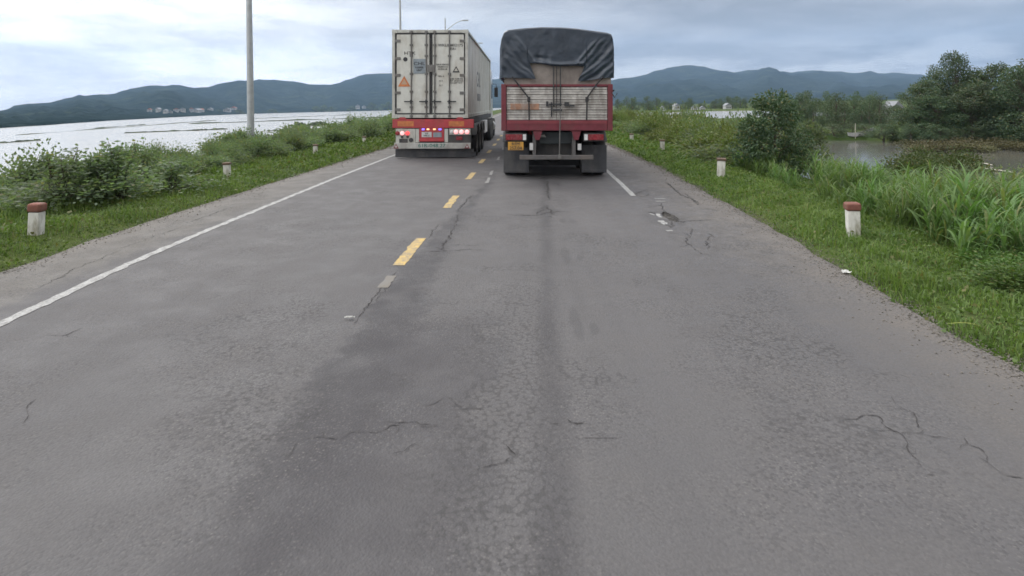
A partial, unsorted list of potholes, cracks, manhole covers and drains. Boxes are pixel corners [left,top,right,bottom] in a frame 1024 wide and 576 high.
crack [856,398,950,475]
crack [283,421,436,459]
crack [635,183,714,255]
crack [431,194,473,252]
